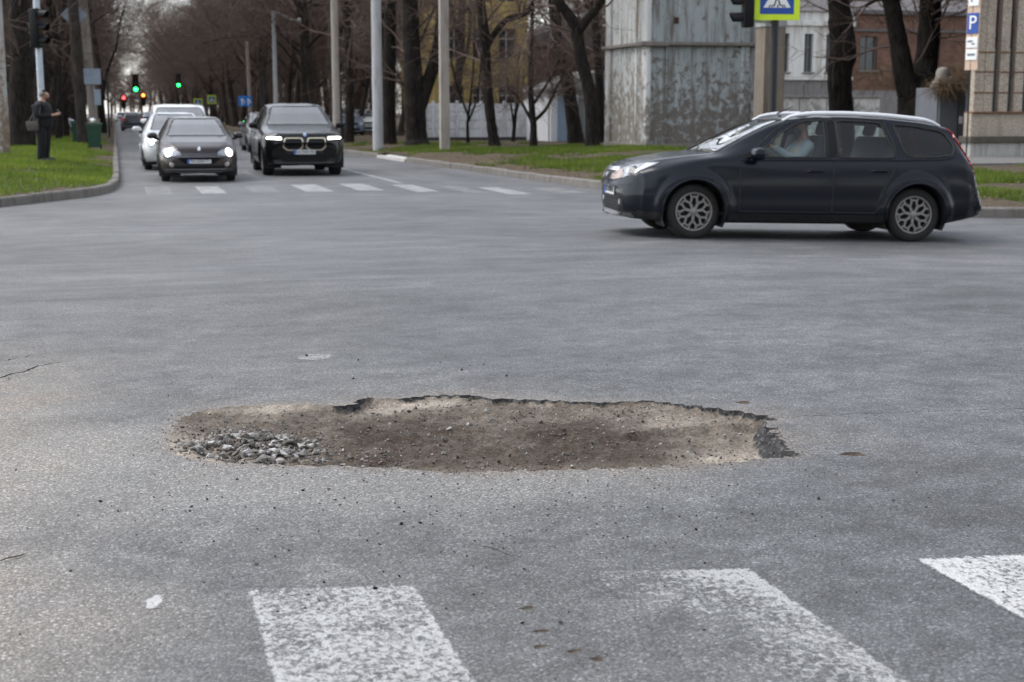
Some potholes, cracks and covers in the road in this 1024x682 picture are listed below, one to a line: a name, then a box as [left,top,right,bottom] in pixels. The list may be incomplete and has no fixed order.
pothole [165,394,800,473]
crack [0,354,60,379]
